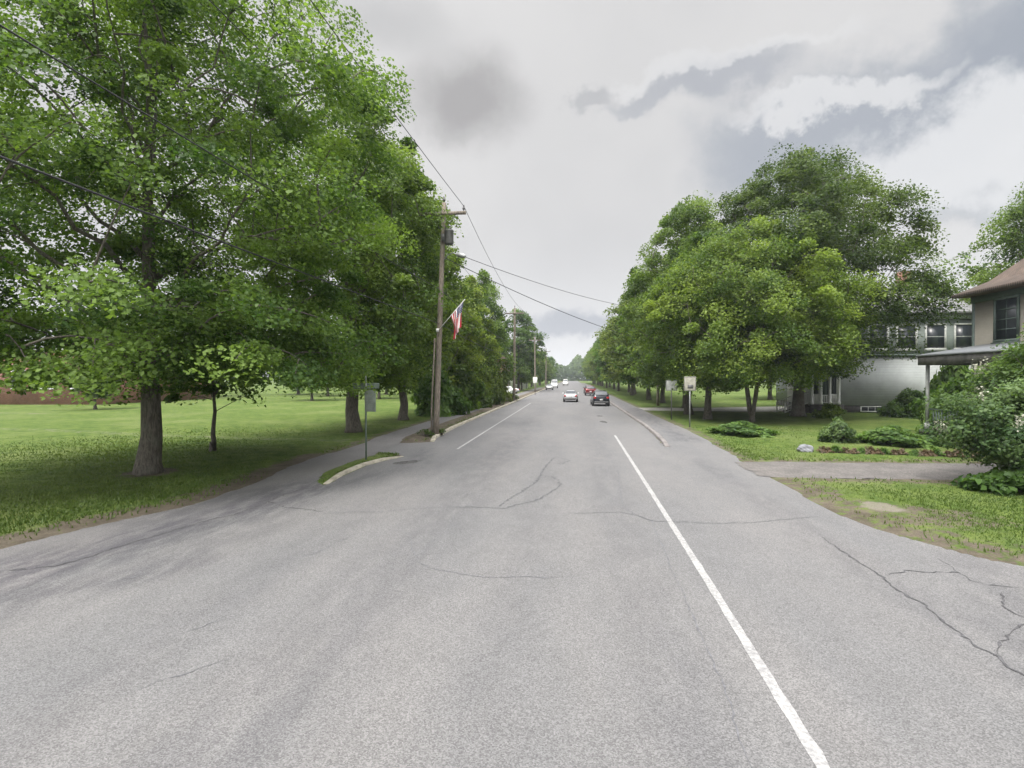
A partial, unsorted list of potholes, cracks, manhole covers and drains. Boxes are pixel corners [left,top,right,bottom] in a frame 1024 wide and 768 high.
crack [823,537,1024,675]
crack [410,539,551,578]
crack [462,458,570,508]
